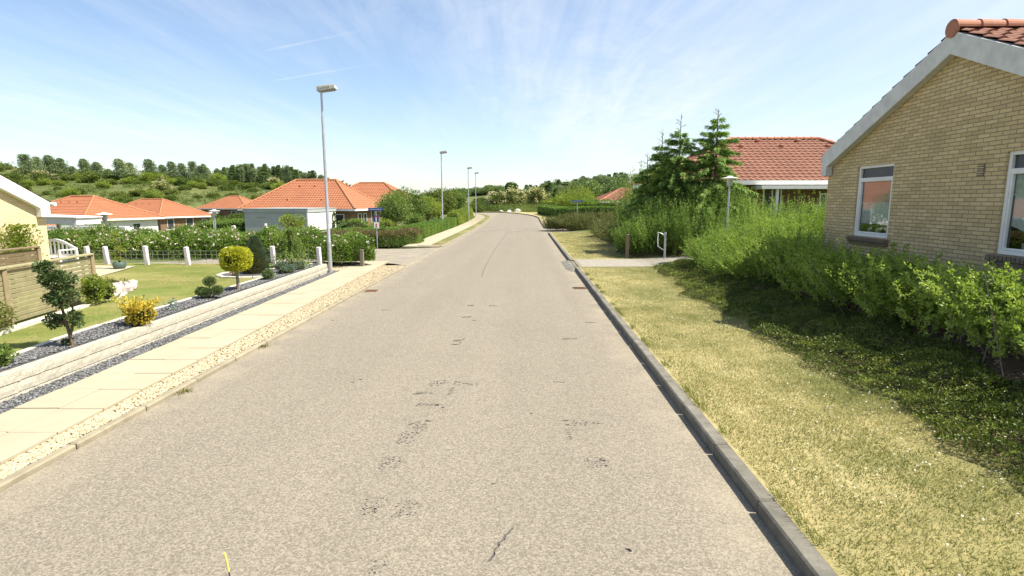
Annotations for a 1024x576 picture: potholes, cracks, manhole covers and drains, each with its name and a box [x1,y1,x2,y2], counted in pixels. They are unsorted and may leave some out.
pothole [388,500,422,518]
pothole [377,456,403,470]
pothole [395,420,432,445]
crack [486,527,514,563]
pothole [583,457,609,468]
pothole [357,497,389,516]
